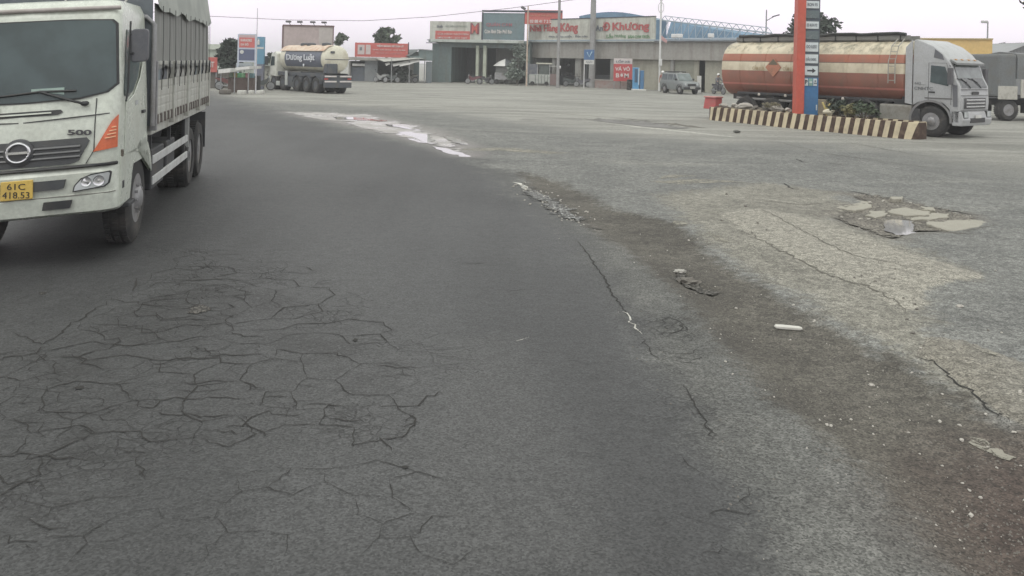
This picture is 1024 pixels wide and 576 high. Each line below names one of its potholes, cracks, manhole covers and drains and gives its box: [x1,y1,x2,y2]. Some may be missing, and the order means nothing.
pothole [835,194,974,238]
crack [0,249,474,566]
pothole [671,273,720,295]
crack [640,316,701,363]
pothole [521,186,592,221]
crack [748,183,925,269]
